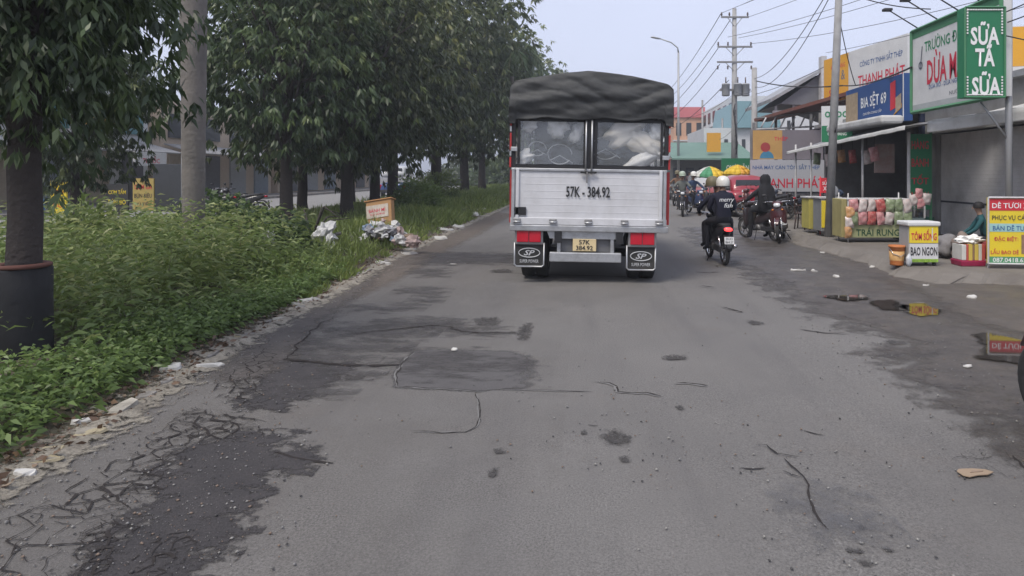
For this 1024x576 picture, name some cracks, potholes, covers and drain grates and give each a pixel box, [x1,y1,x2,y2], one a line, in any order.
crack [596,381,660,397]
crack [744,444,828,529]
pothole [603,431,632,445]
crack [0,317,515,576]
pothole [517,323,532,340]
